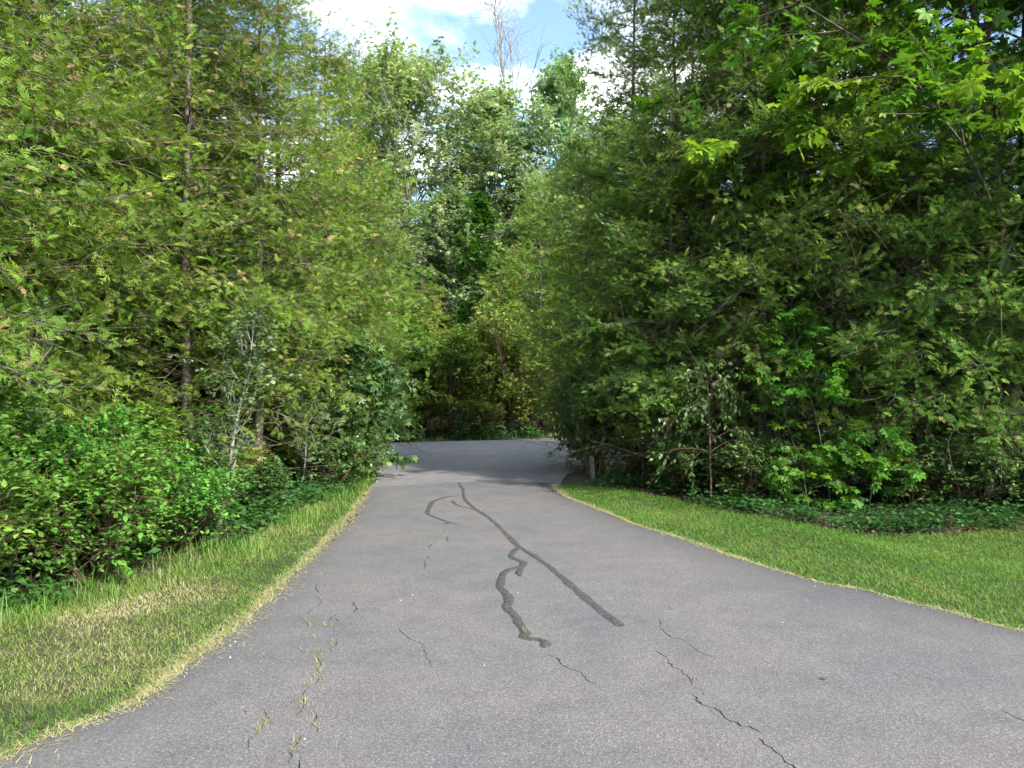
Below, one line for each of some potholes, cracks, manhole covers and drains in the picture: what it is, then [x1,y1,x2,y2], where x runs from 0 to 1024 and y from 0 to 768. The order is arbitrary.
crack [655,606,796,768]
crack [244,585,358,768]
